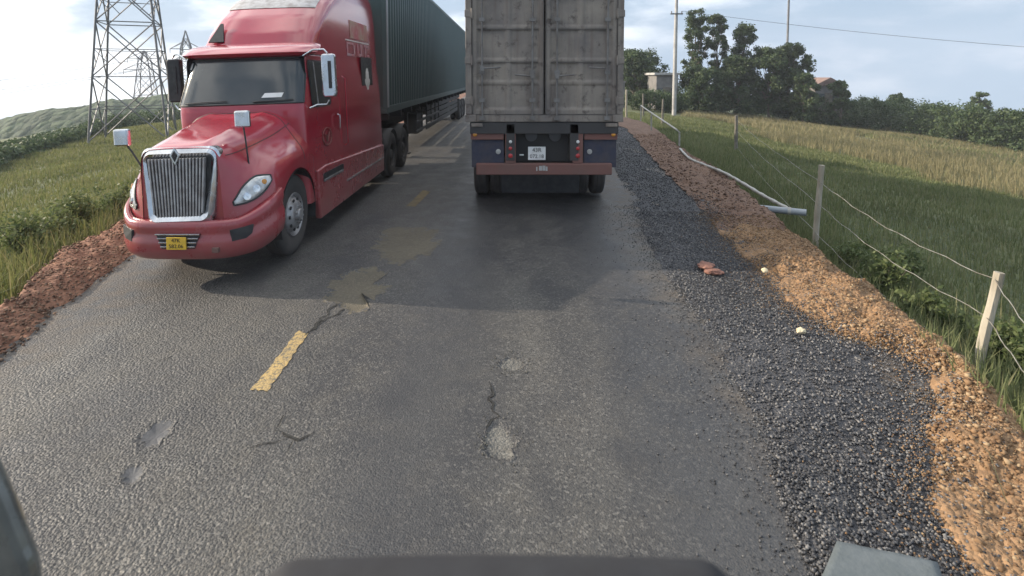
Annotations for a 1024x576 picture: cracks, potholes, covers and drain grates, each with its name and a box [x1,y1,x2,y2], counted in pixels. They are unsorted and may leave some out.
pothole [117,462,149,489]
pothole [129,414,180,456]
pothole [479,418,521,465]
crack [250,415,315,450]
crack [486,381,500,431]
crack [307,303,345,333]
pothole [495,356,528,373]
